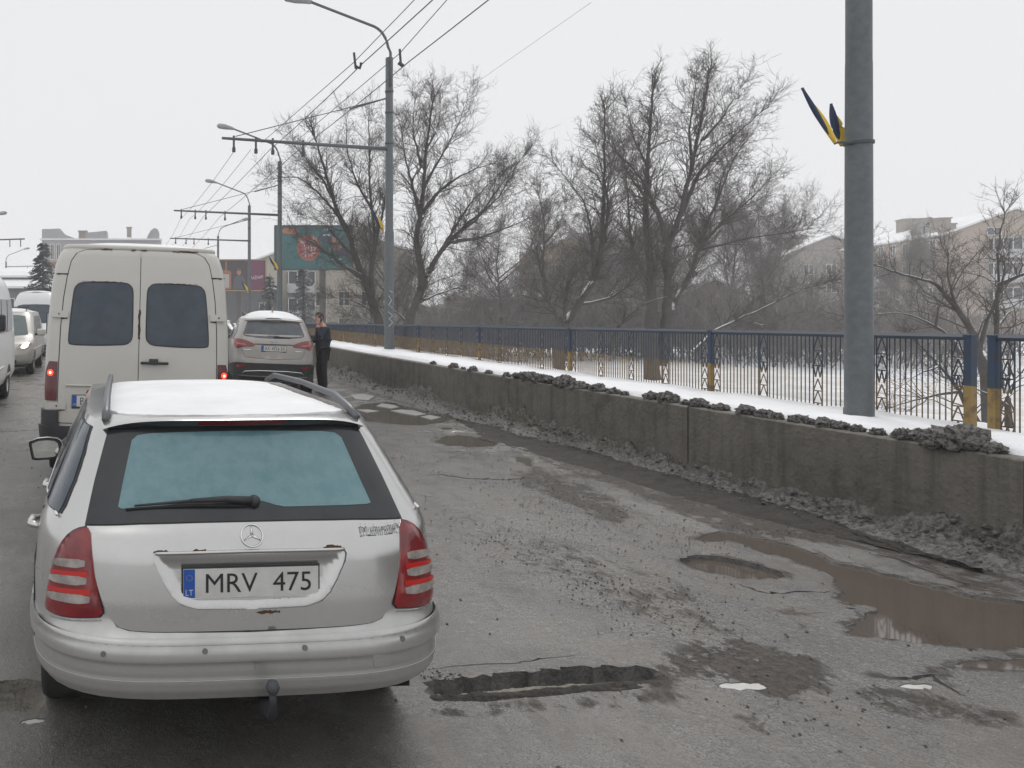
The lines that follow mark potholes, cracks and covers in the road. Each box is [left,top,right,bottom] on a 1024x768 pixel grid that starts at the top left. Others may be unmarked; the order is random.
pothole [432,434,499,447]
crack [872,668,961,694]
crack [734,583,855,614]
crack [432,655,573,669]
pothole [423,665,668,695]
pothole [693,530,1024,650]
